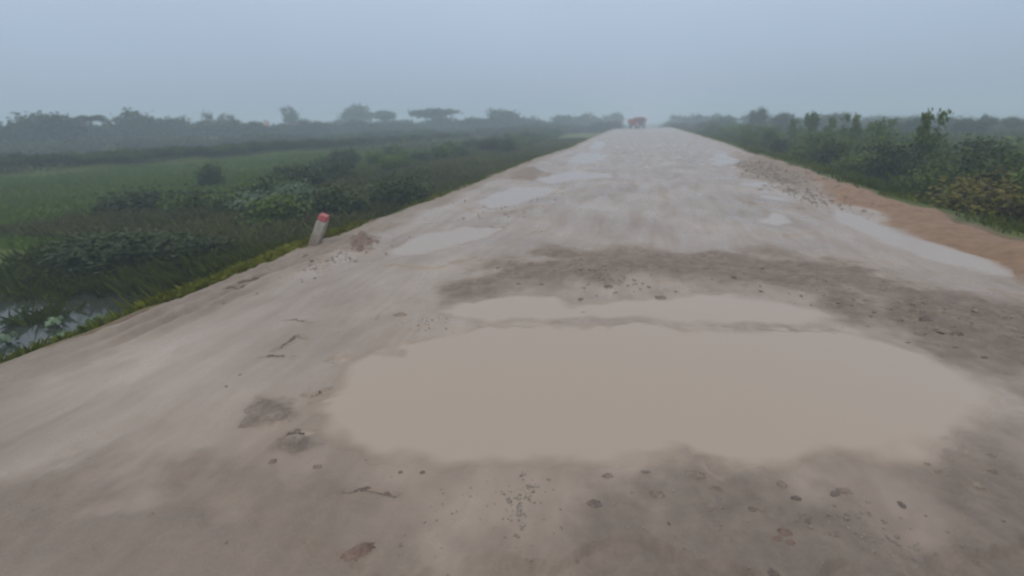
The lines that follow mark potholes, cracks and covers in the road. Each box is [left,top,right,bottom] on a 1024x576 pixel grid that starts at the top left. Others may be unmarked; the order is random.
pothole [531,170,618,184]
pothole [475,185,562,209]
pothole [382,225,506,256]
pothole [754,212,796,228]
pothole [301,320,1003,482]
pothole [430,290,846,332]
pothole [828,209,1024,282]
